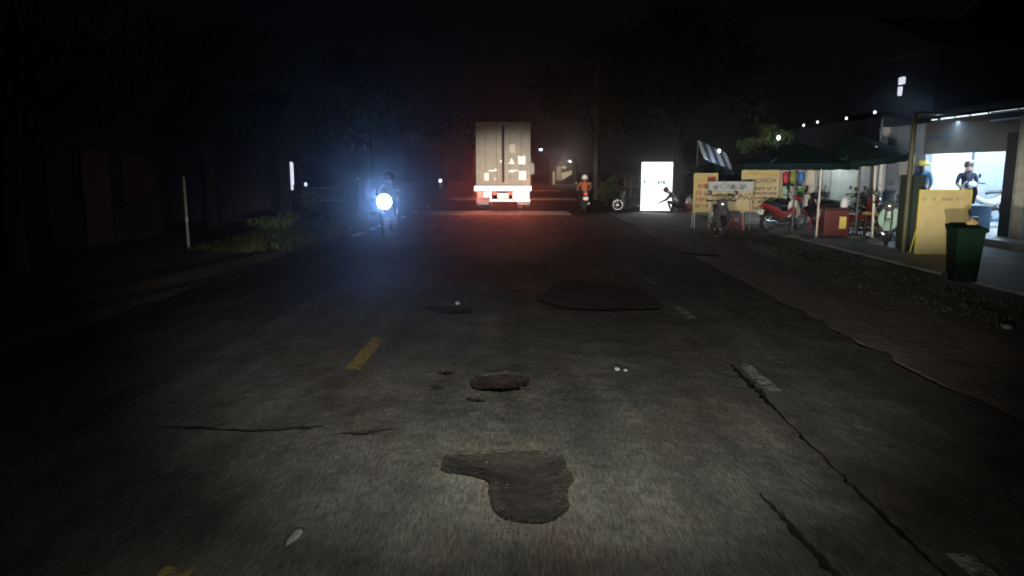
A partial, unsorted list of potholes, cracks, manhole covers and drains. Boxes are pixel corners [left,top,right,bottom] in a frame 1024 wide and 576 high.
pothole [462,368,538,394]
pothole [434,444,588,537]
crack [729,363,948,576]
pothole [462,393,490,404]
crack [151,425,398,435]
